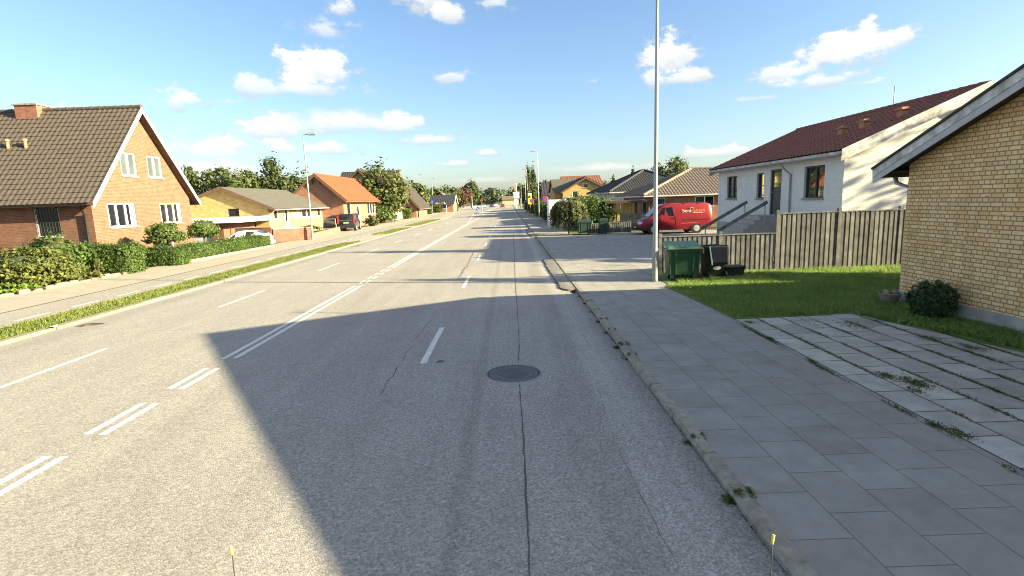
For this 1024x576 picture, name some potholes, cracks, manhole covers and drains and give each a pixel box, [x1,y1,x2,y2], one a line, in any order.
crack [513,235,531,576]
manhole cover [486,365,541,382]
